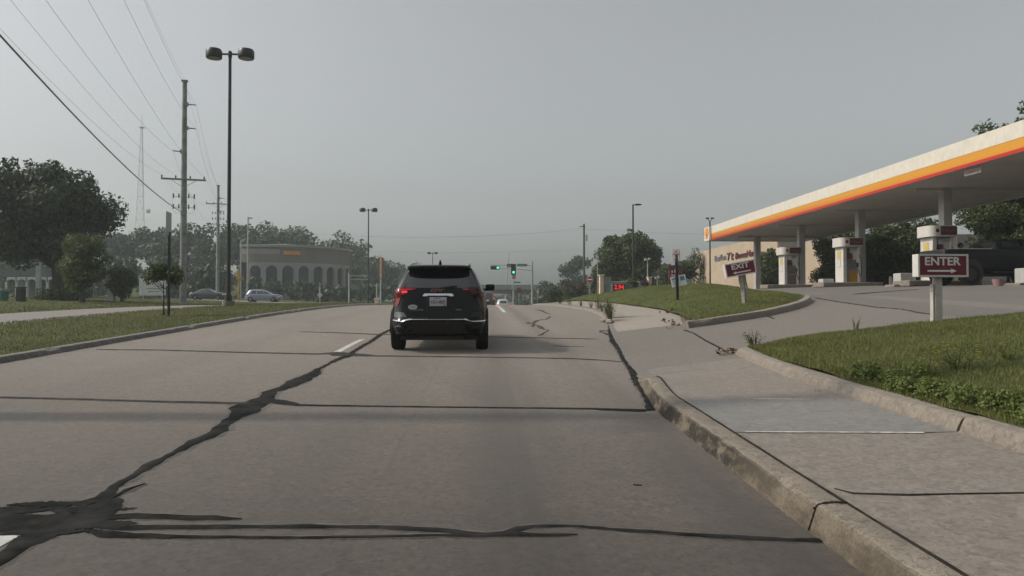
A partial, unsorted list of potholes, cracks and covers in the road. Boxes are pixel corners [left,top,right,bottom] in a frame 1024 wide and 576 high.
crack [266,376,1024,576]
crack [96,310,623,362]
crack [0,396,247,405]
